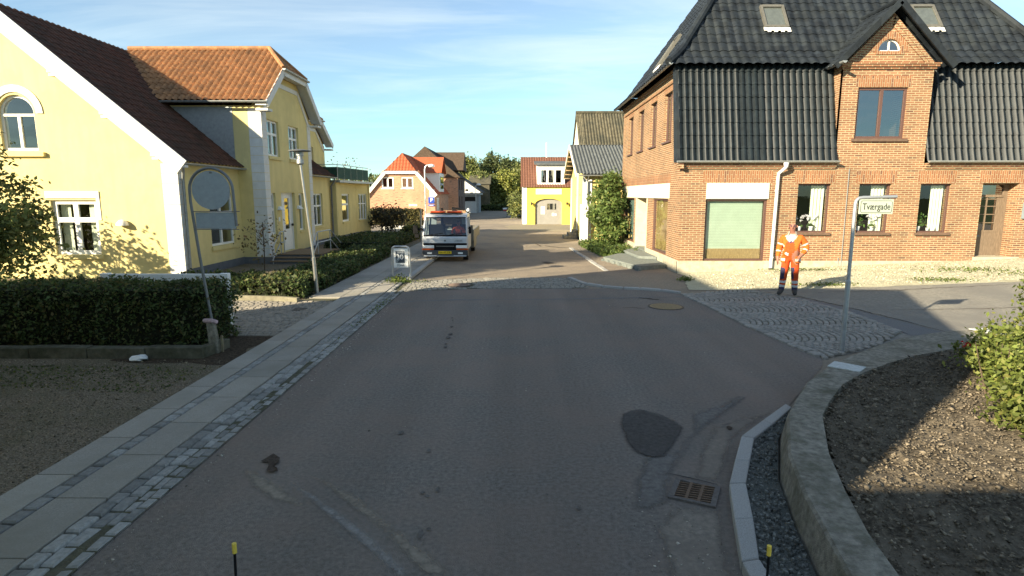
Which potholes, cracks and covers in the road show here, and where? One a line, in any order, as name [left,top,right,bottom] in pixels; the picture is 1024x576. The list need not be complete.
drain grate [668,477,721,509]
